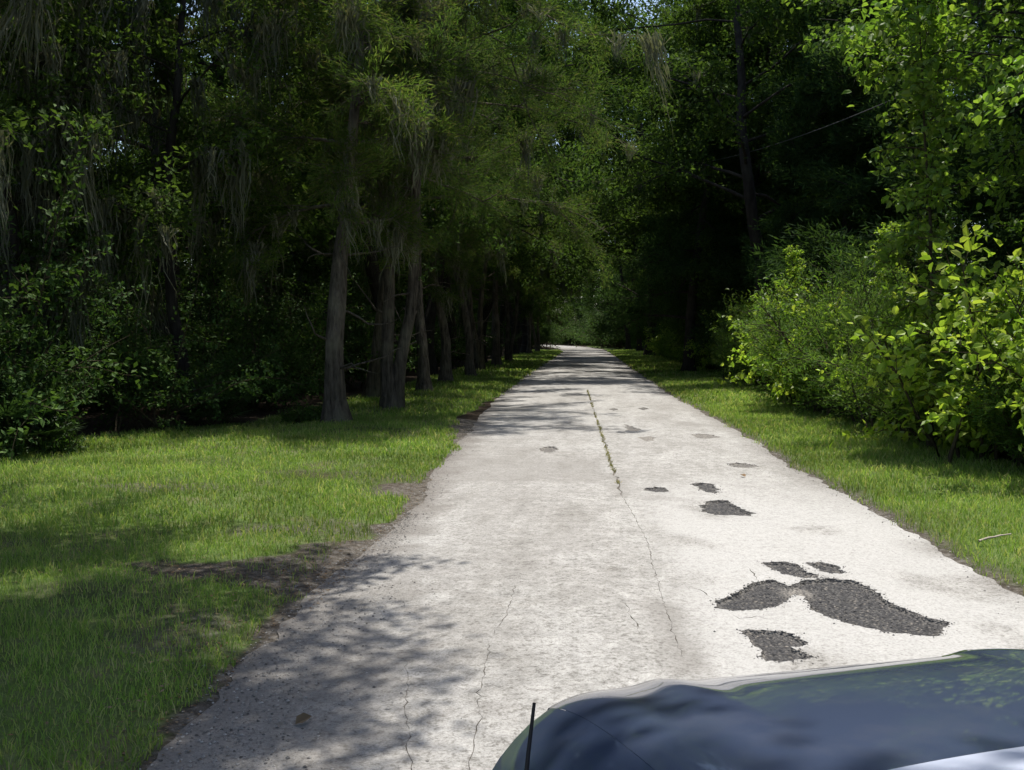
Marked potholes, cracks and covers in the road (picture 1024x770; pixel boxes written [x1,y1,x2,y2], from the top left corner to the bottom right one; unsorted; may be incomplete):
crack [468,584,516,770]
crack [404,662,413,770]
crack [587,390,685,659]
